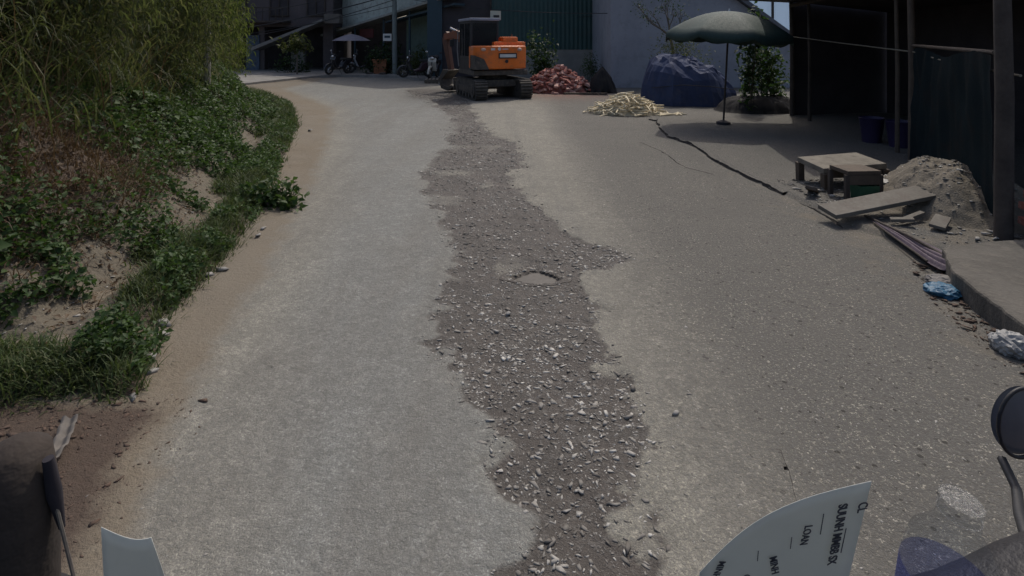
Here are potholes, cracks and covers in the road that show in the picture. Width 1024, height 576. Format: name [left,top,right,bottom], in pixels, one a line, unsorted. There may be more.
crack [769,449,806,506]
pothole [499,266,572,286]
crack [637,119,851,229]
